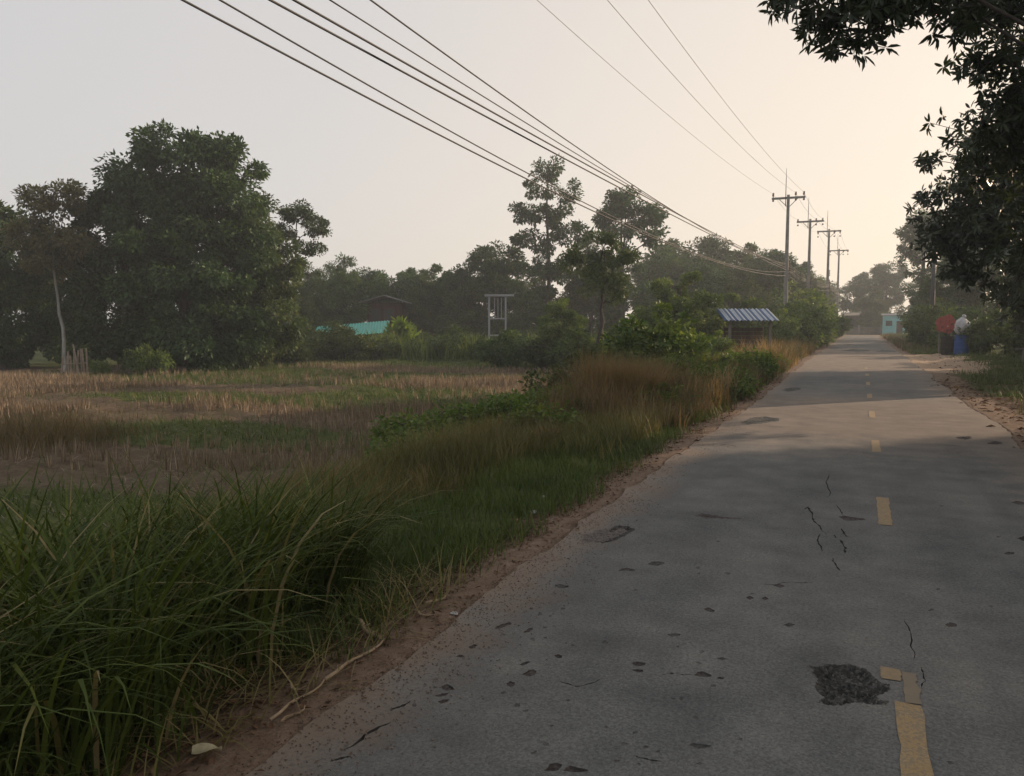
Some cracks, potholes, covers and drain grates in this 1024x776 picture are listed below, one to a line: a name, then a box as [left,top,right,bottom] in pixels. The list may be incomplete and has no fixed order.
crack [904,620,926,688]
pothole [807,663,890,706]
crack [805,476,847,570]
pothole [581,525,635,544]
